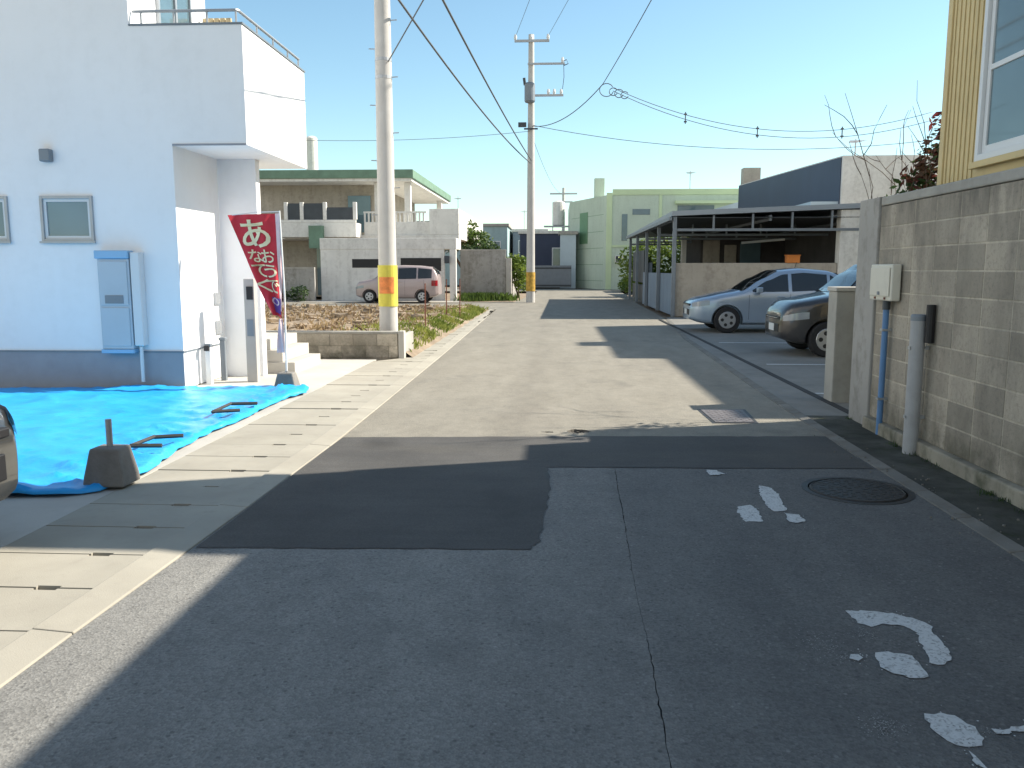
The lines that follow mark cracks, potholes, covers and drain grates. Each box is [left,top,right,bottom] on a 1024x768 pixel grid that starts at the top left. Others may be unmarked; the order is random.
crack [615,471,672,768]
manhole cover [801,477,915,505]
